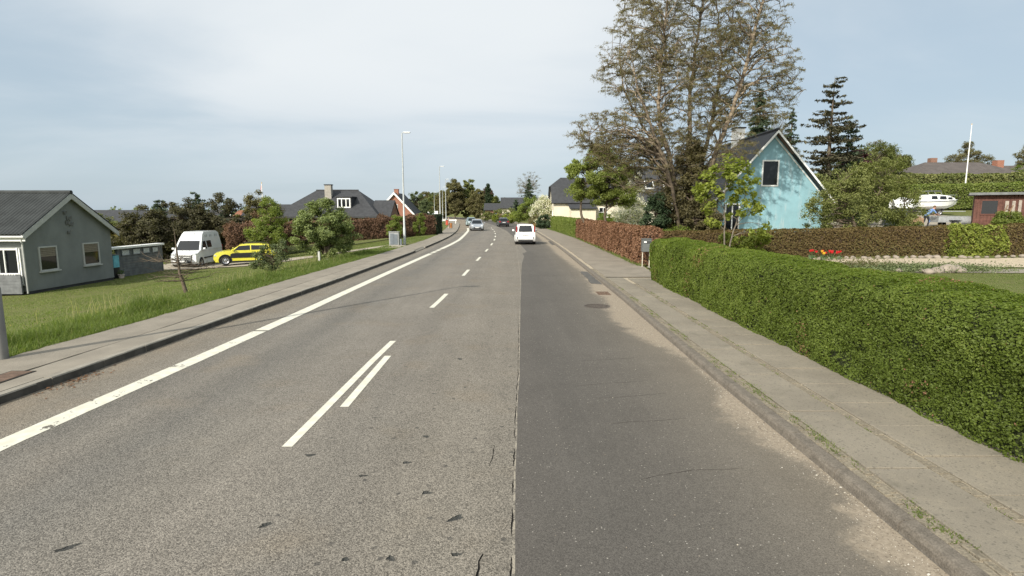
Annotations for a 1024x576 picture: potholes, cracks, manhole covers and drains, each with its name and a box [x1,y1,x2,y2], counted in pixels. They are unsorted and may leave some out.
manhole cover [0,371,36,383]
